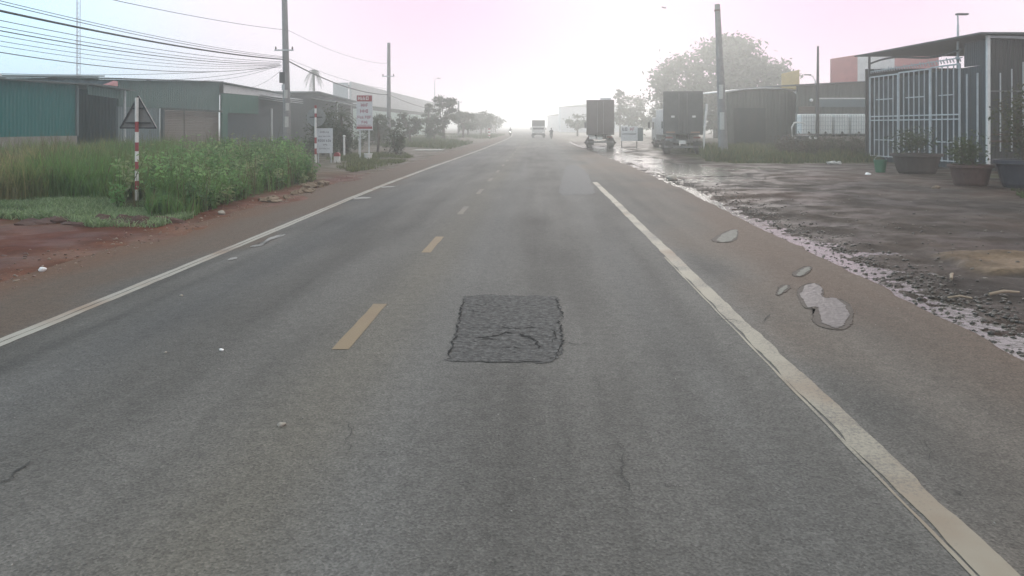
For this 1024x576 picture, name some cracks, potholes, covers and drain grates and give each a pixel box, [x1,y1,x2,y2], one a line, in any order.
pothole [711,229,739,243]
pothole [792,266,813,277]
pothole [797,283,854,330]
pothole [775,284,791,296]
